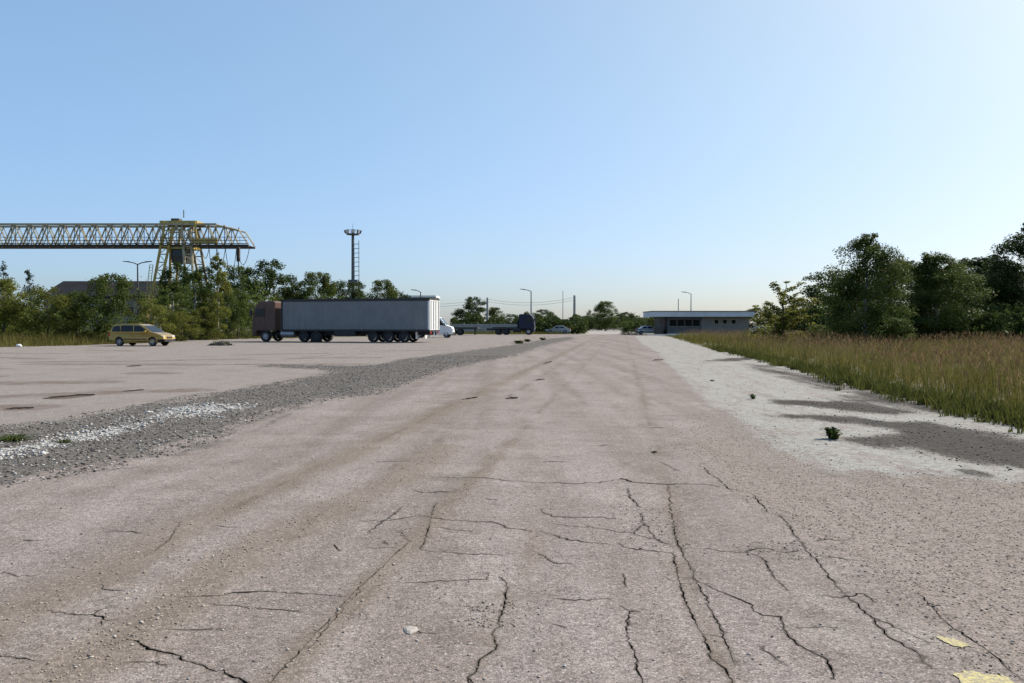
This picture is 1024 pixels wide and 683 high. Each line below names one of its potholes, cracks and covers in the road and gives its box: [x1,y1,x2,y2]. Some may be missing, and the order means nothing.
crack [125,629,248,683]
crack [37,608,105,626]
crack [918,593,1019,677]
crack [703,469,932,669]
crack [371,462,834,683]
crack [189,591,340,611]
